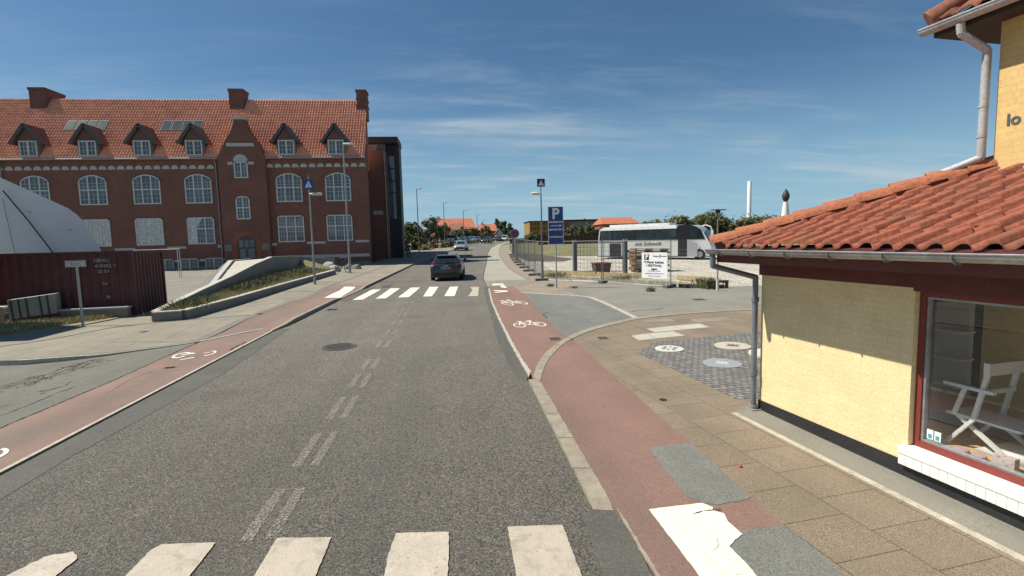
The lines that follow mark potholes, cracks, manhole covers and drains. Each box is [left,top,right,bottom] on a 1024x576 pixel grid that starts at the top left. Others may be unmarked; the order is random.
crack [0,359,112,416]
manhole cover [321,343,357,351]
